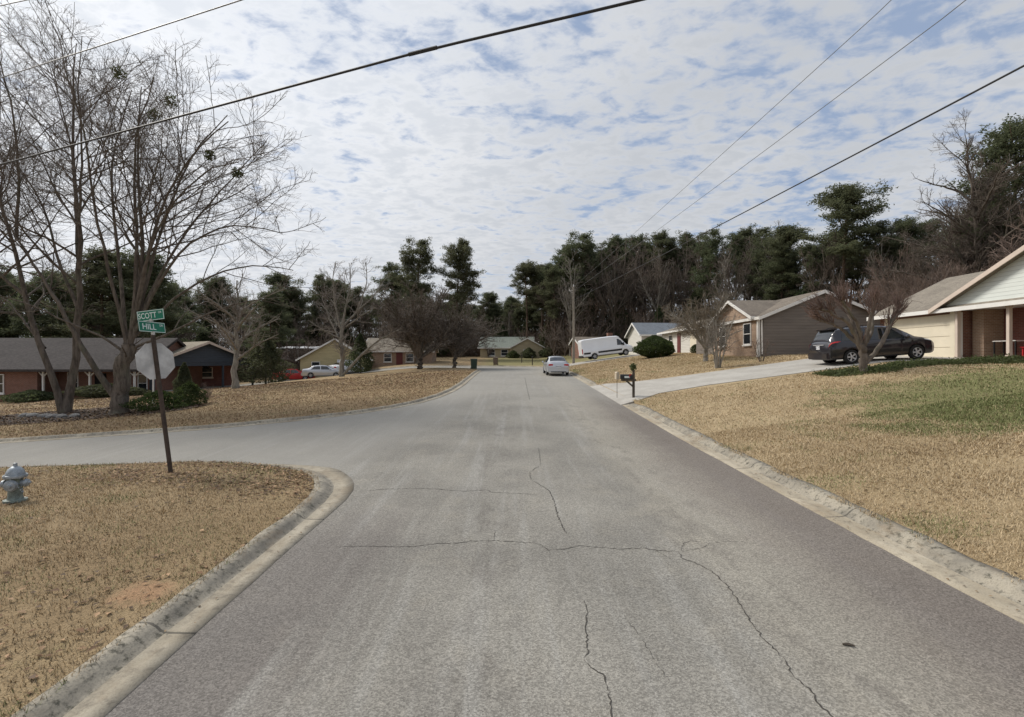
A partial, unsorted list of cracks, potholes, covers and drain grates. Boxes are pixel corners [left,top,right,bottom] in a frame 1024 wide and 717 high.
crack [353,463,833,717]
